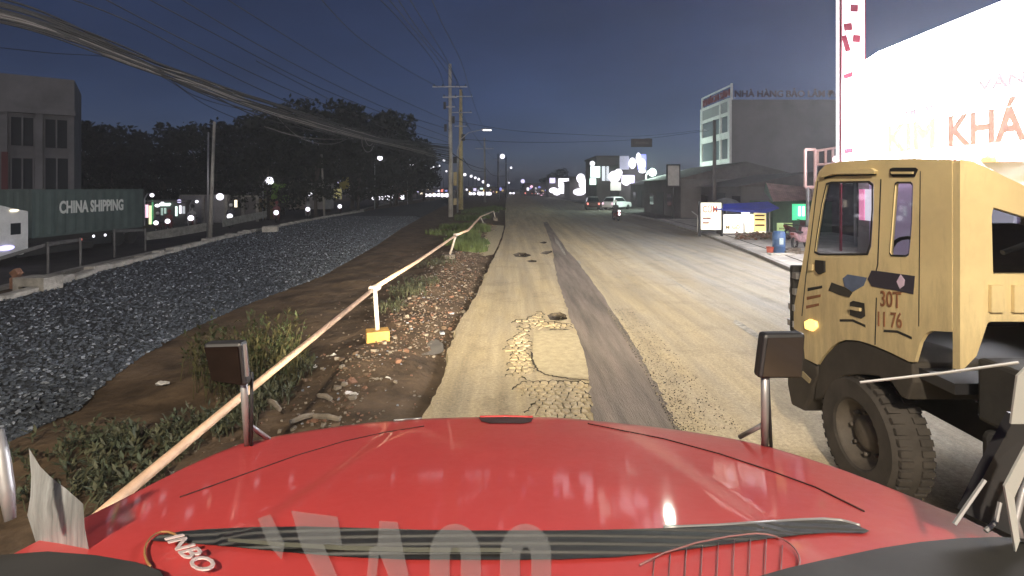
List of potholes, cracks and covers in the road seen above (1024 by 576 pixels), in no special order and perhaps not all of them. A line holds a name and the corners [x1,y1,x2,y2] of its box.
pothole [547,312,567,321]
